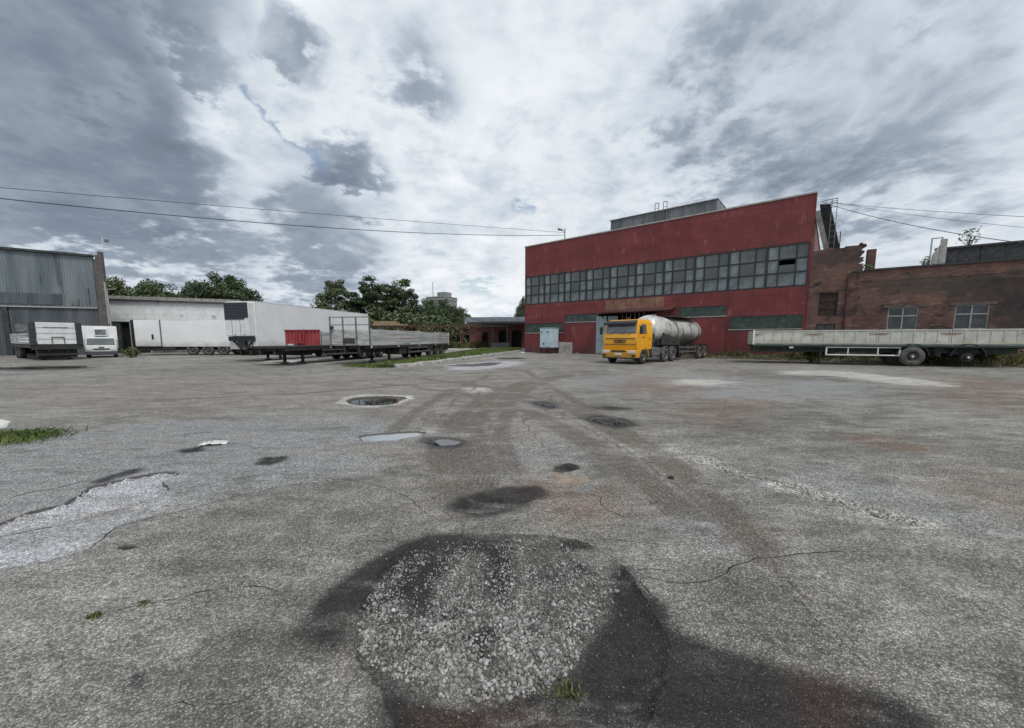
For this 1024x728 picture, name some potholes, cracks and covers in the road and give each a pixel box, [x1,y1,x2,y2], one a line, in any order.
pothole [256,456,288,465]
pothole [353,533,671,728]
crack [53,585,309,624]
pothole [579,417,630,425]
crack [560,489,871,600]
pothole [358,431,427,441]
crack [1,470,437,570]
pothole [423,437,464,446]
pothole [0,471,179,534]
